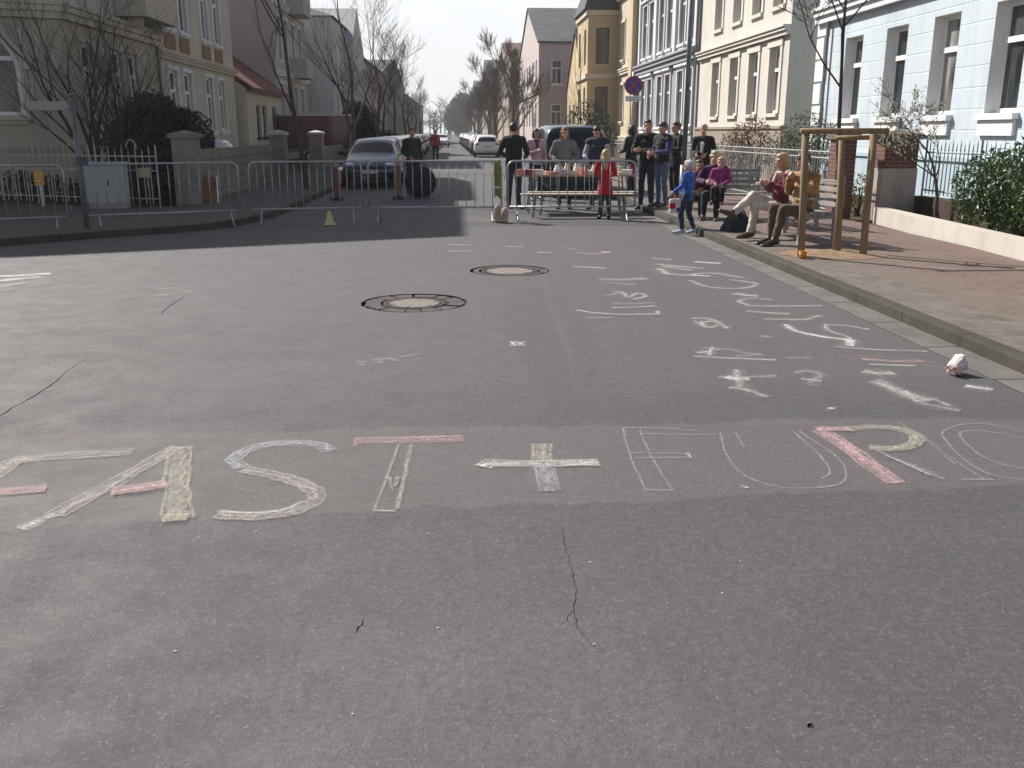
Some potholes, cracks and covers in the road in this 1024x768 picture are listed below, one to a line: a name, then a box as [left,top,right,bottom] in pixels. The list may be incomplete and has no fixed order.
crack [0,359,86,416]
manhole cover [470,265,550,276]
manhole cover [361,294,467,312]
crack [562,526,597,649]
